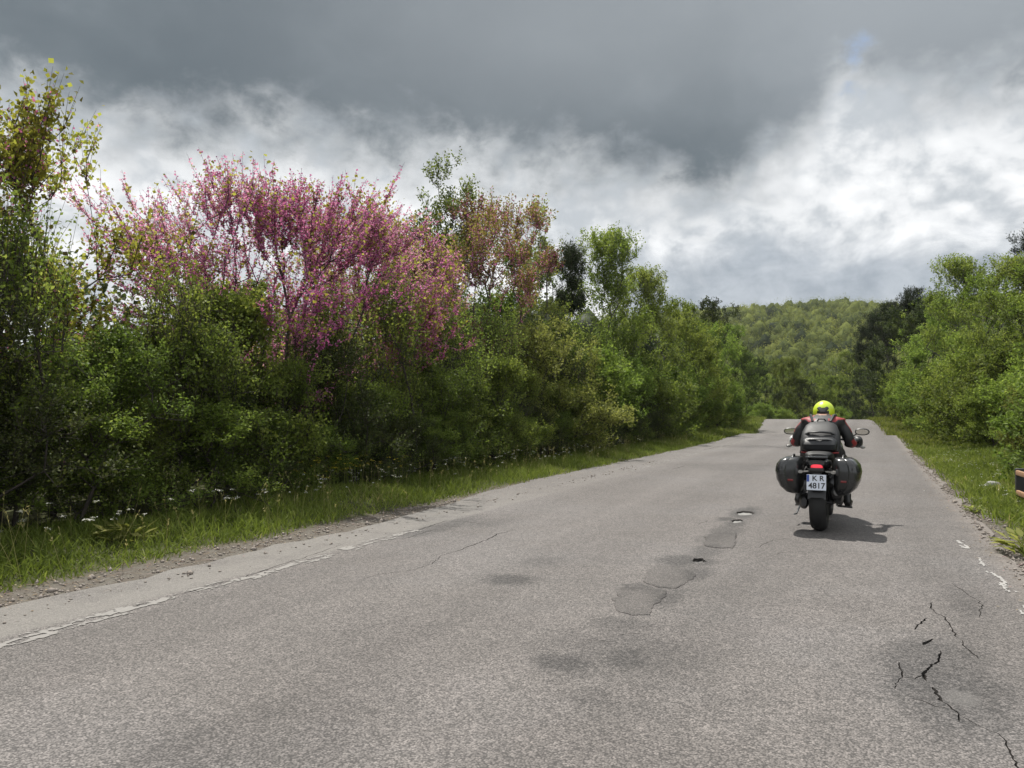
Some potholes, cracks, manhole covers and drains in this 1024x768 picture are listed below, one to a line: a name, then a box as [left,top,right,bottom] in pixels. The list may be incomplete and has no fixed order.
crack [894,603,1019,768]
